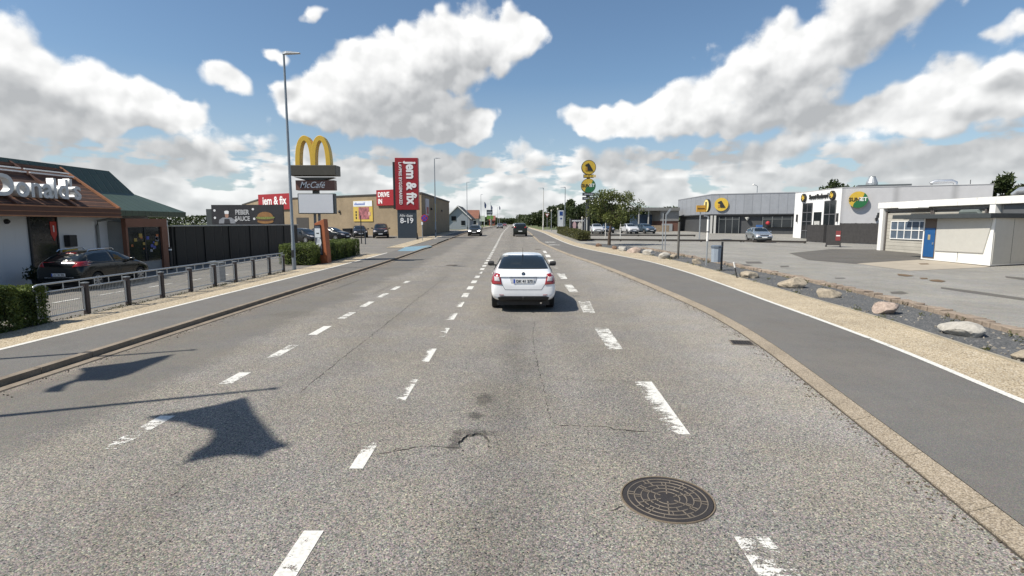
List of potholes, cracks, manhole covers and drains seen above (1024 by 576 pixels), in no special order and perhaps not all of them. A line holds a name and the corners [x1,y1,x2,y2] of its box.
crack [532,322,654,432]
manhole cover [621,476,716,524]
pothole [458,433,490,455]
